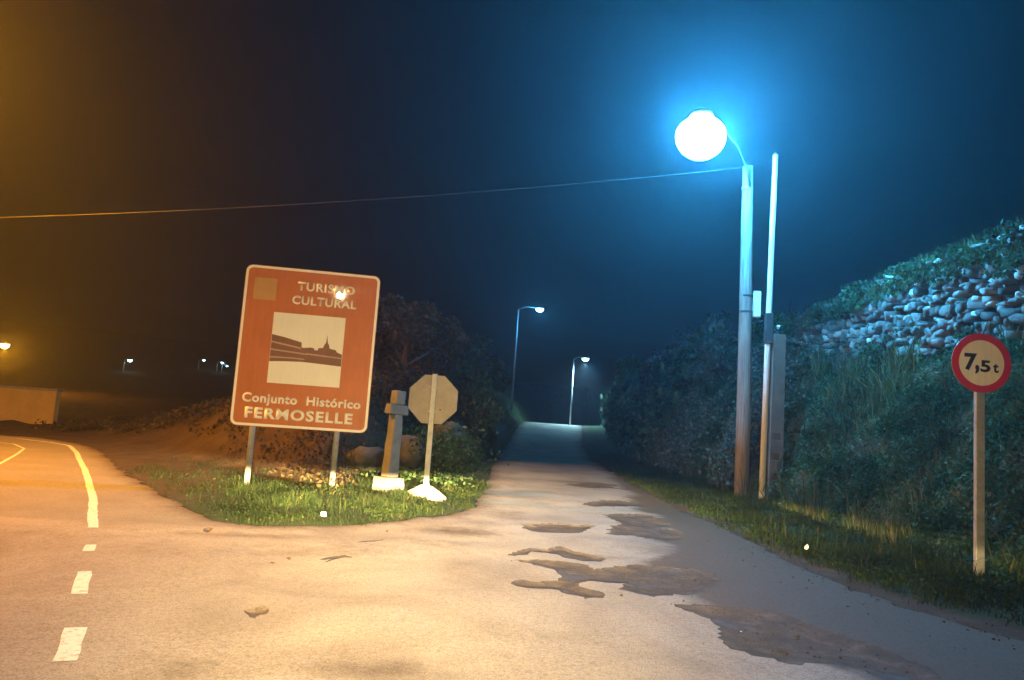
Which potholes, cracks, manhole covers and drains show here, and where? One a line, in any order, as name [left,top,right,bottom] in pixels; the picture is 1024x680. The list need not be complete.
pothole [511,559,723,599]
pothole [508,546,605,562]
pothole [522,523,596,533]
pothole [601,513,684,541]
pothole [674,604,941,680]
